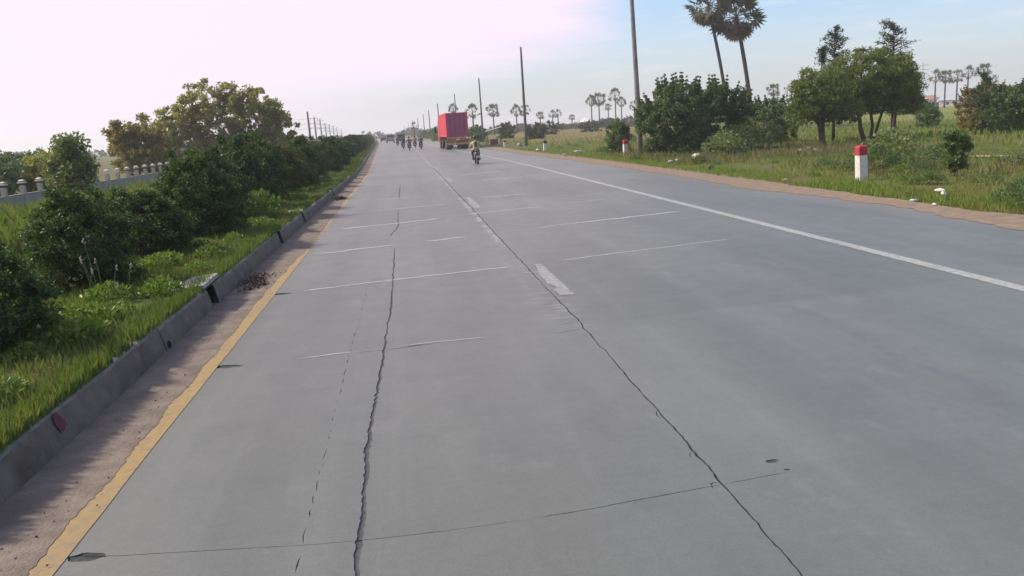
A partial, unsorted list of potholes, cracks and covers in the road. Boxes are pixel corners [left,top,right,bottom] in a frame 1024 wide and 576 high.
crack [87,169,803,576]
